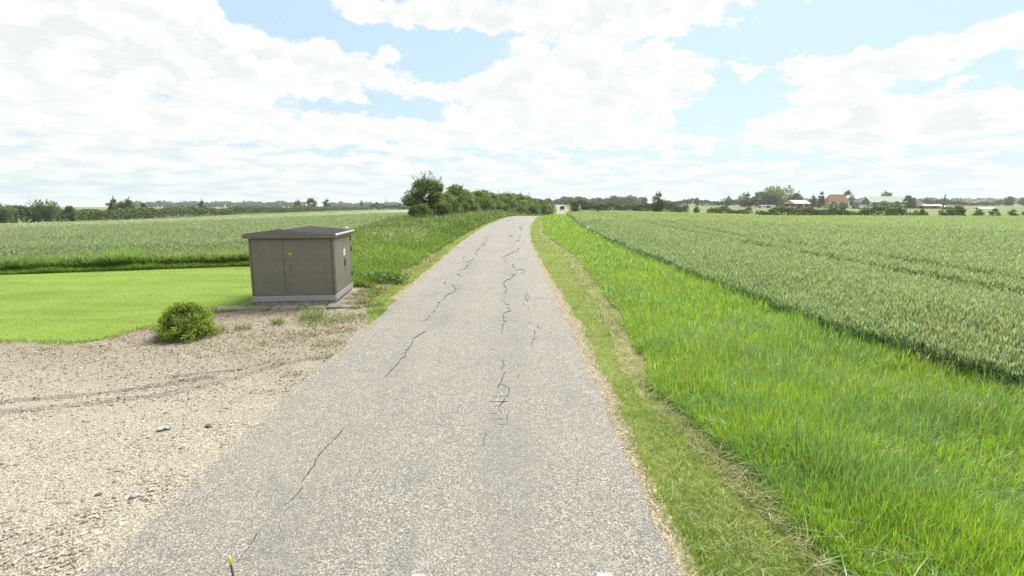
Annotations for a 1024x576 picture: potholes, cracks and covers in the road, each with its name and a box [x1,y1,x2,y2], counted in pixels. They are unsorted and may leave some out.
crack [235,428,344,564]
crack [385,220,535,443]
